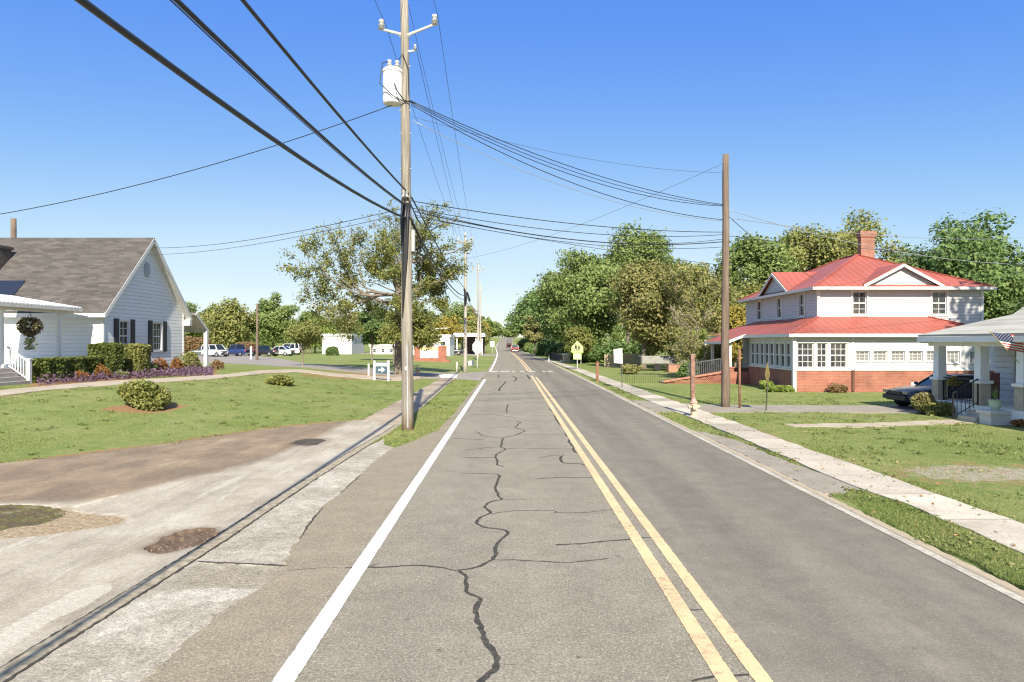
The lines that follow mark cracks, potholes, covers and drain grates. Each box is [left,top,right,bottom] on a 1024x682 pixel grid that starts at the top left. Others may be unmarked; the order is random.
pothole [144,528,220,554]
